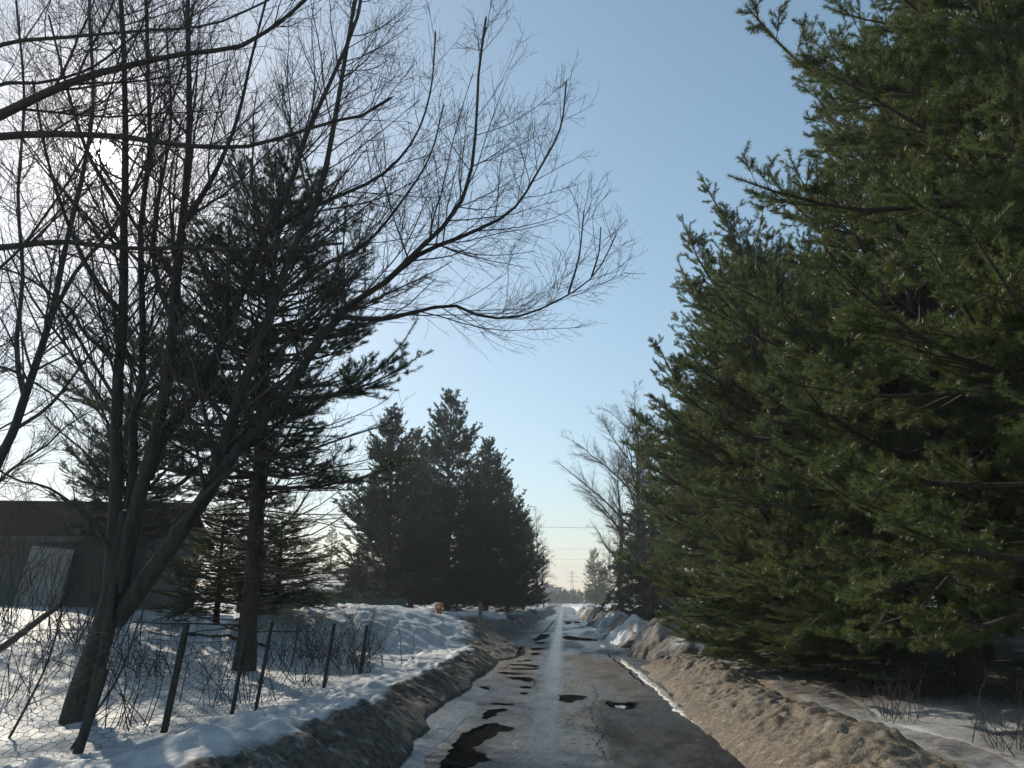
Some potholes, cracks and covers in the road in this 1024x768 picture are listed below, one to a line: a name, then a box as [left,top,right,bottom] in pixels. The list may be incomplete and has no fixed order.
crack [590,682,613,767]
pothole [558,695,587,703]
pothole [604,701,638,709]
pothole [439,723,514,768]
pothole [481,708,508,720]
